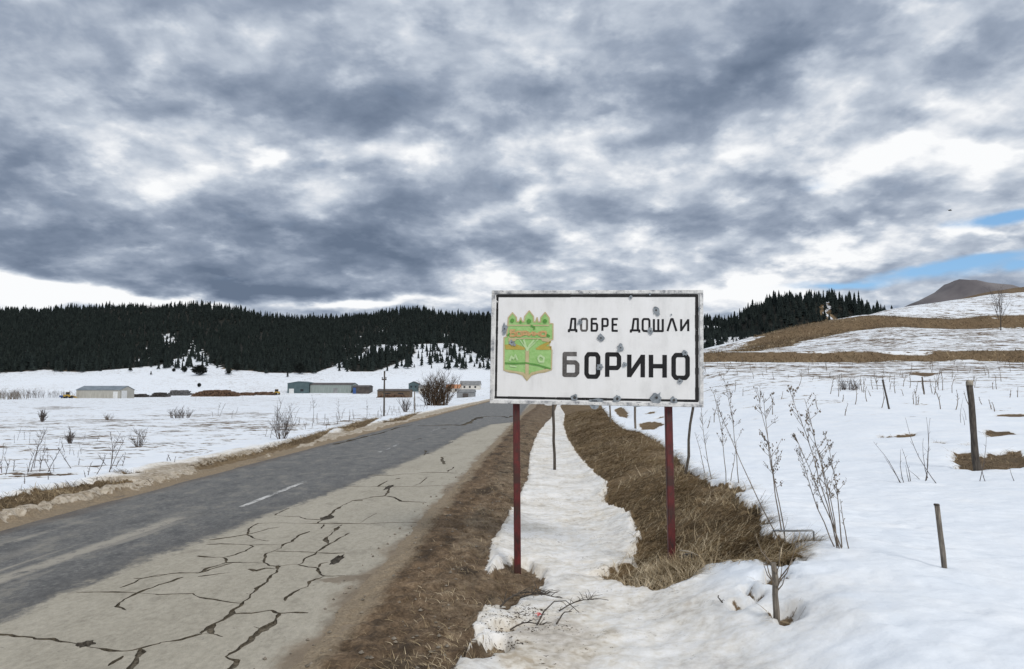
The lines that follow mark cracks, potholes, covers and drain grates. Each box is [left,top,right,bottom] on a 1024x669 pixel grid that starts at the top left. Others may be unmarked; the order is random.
crack [0,525,349,669]
